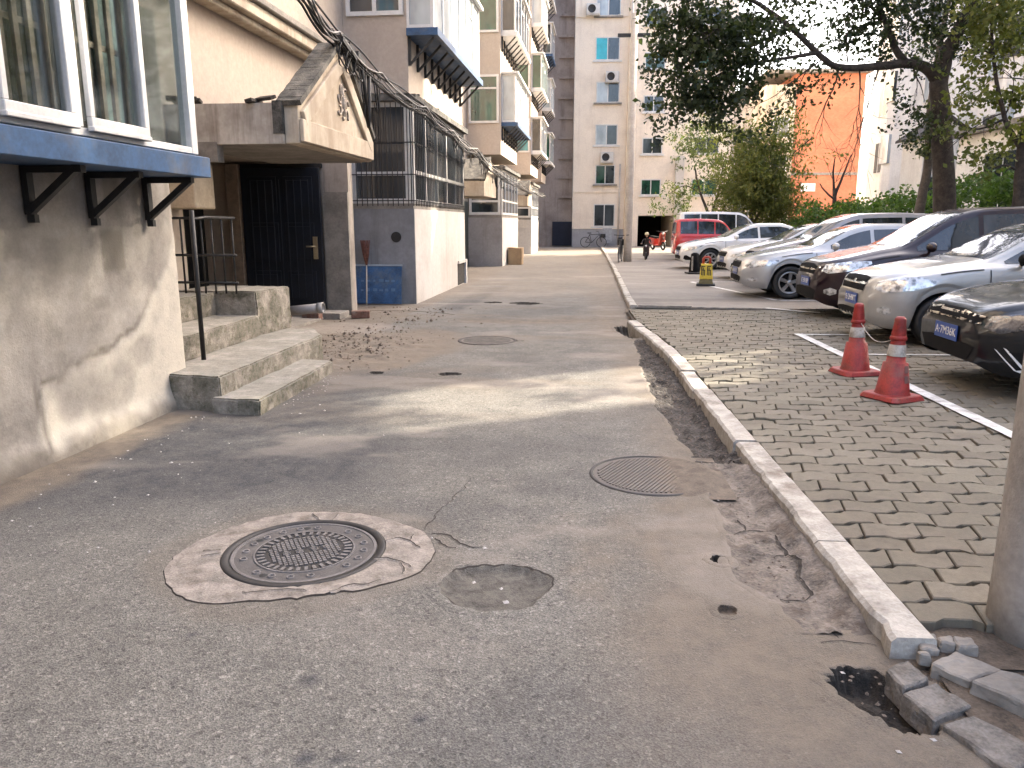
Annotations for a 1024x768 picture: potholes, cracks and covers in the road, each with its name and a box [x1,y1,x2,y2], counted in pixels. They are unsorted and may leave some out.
pothole [702,552,739,569]
manhole cover [163,512,436,605]
pothole [610,325,642,339]
pothole [808,657,958,748]
manhole cover [458,336,516,345]
pothole [708,601,747,620]
crack [735,520,816,604]
manhole cover [589,456,738,500]
crack [330,478,482,593]
